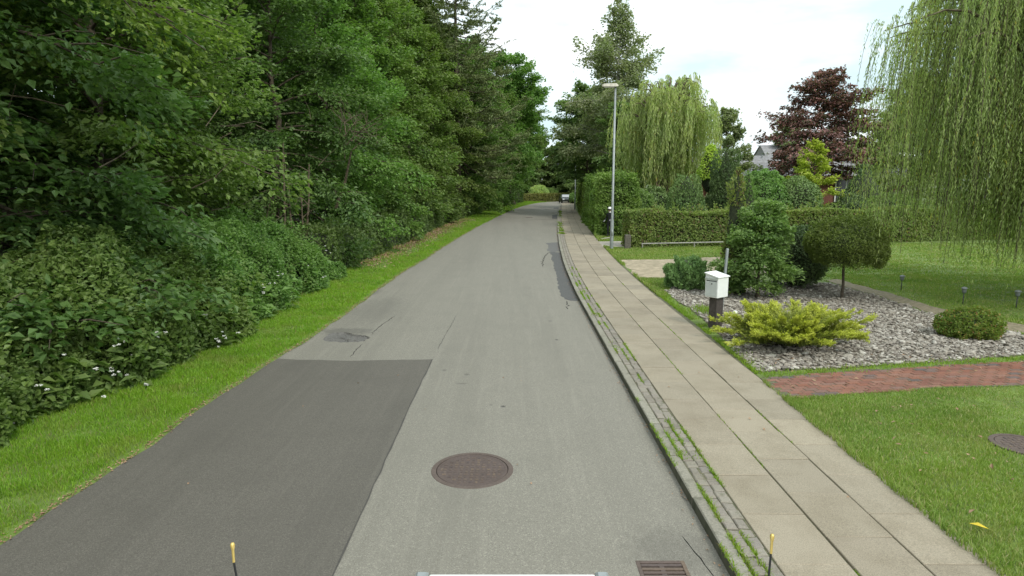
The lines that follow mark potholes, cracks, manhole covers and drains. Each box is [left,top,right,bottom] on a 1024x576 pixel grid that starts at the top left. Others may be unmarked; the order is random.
drain grate [635,561,691,576]
manhole cover [988,433,1024,455]
manhole cover [431,452,513,489]
